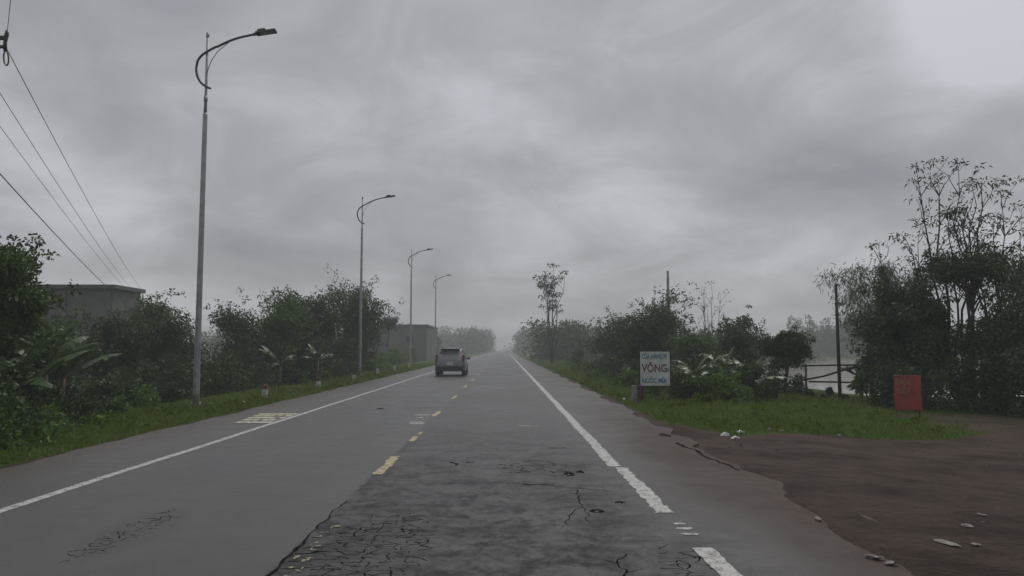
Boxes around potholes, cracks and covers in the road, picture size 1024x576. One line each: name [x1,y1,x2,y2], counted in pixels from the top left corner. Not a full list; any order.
crack [450,461,608,525]
crack [265,501,439,576]
crack [606,544,714,576]
crack [676,443,740,471]
